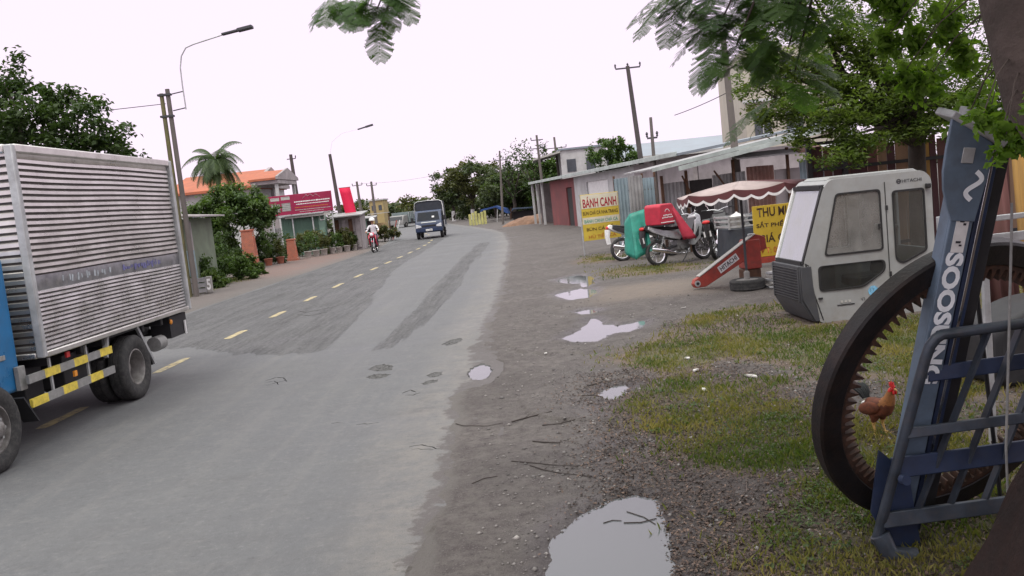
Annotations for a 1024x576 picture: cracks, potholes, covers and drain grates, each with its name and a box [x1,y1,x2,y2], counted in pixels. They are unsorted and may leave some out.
pothole [467,363,493,380]
